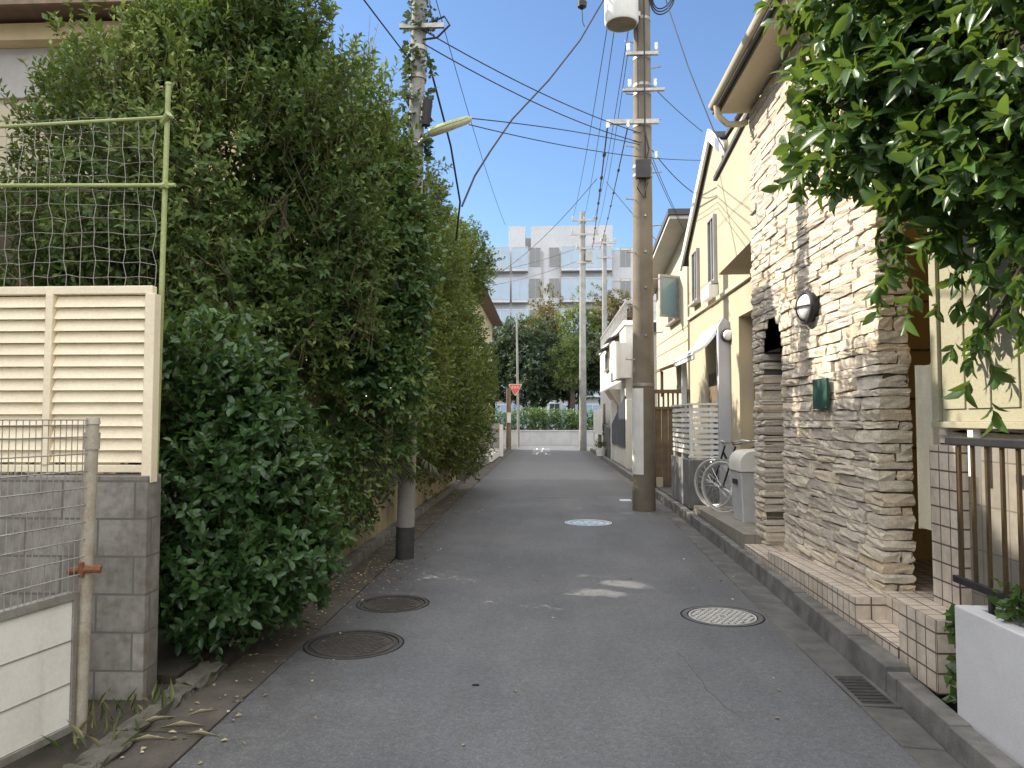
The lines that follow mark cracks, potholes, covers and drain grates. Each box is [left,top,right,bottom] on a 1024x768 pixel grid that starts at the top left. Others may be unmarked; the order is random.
manhole cover [680,606,766,627]
manhole cover [302,630,404,660]
manhole cover [356,595,430,613]
